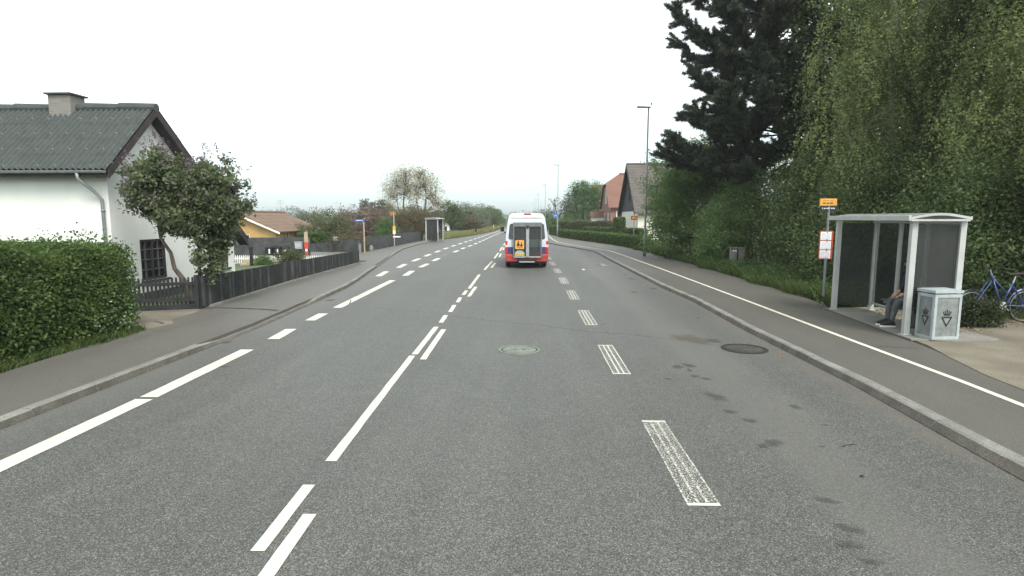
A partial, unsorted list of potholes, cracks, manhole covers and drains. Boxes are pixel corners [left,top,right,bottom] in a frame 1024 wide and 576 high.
manhole cover [498,345,540,355]
manhole cover [721,344,769,354]
